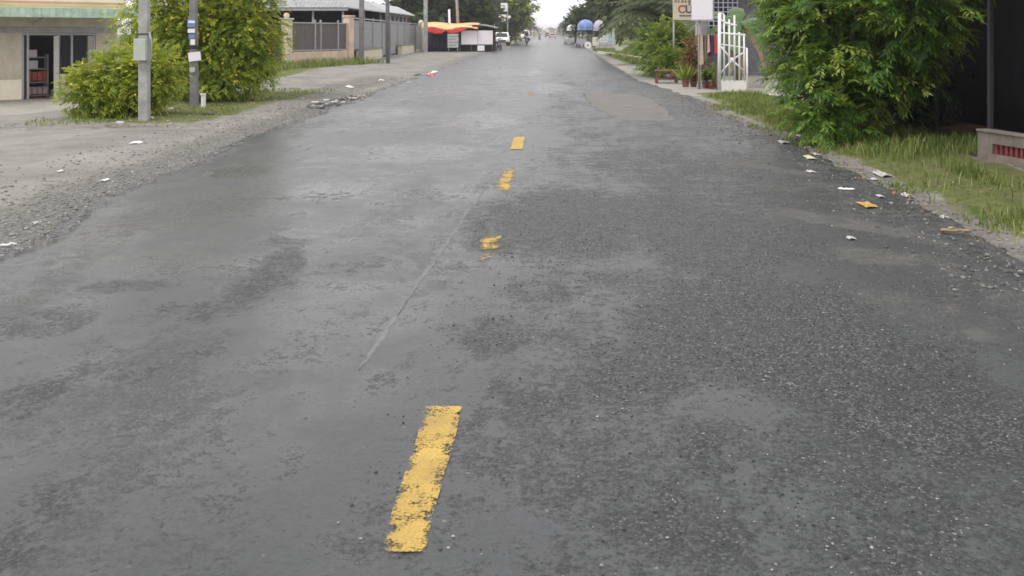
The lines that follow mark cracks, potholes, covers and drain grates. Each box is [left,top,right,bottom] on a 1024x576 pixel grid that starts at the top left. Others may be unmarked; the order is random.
crack [359,190,484,369]
